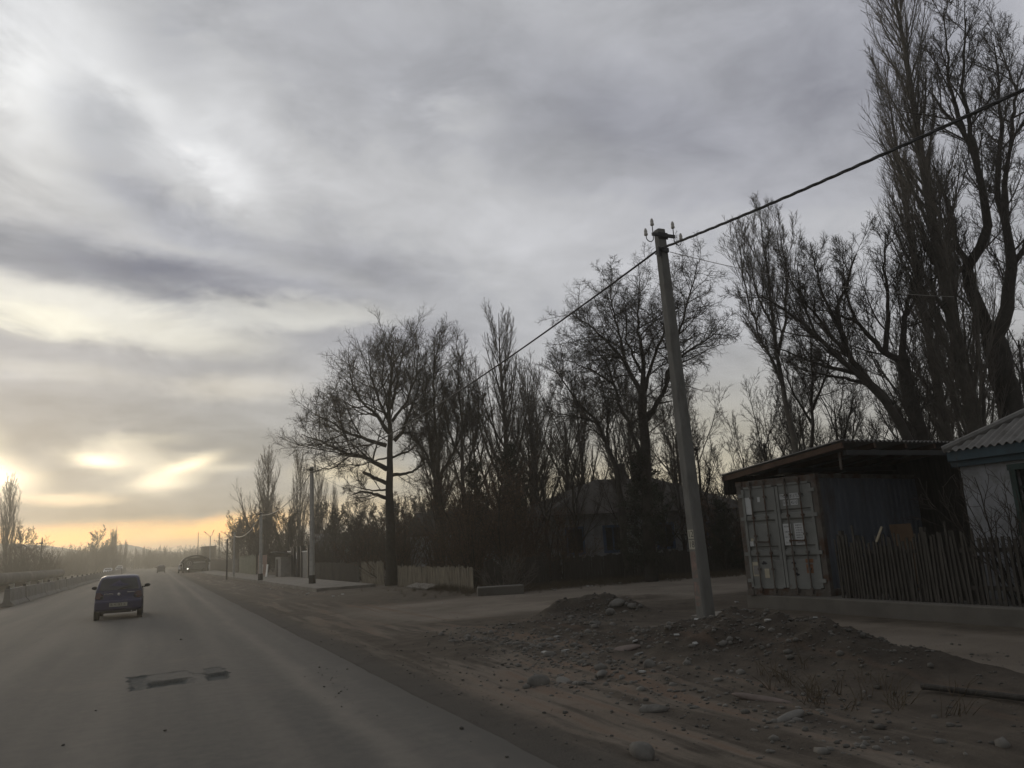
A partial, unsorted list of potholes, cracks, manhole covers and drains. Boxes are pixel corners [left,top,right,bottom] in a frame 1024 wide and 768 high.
pothole [125,666,232,692]
